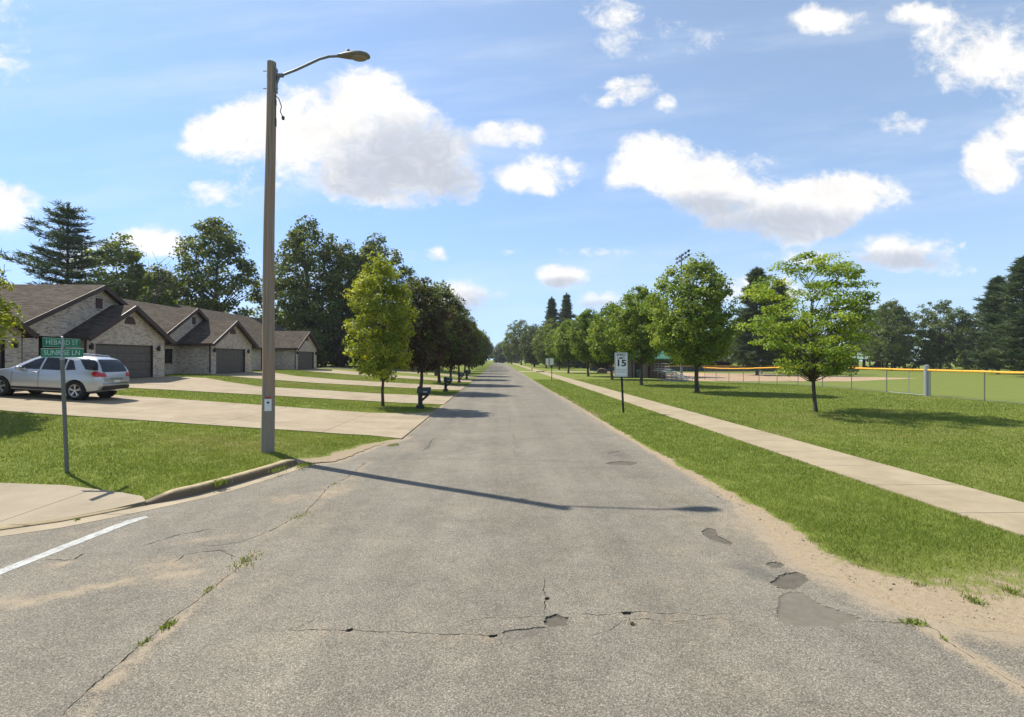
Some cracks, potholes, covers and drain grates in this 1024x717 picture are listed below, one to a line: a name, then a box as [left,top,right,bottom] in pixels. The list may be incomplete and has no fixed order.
crack [575,611,730,635]
crack [63,463,365,715]
pothole [543,614,569,627]
crack [290,578,547,637]
